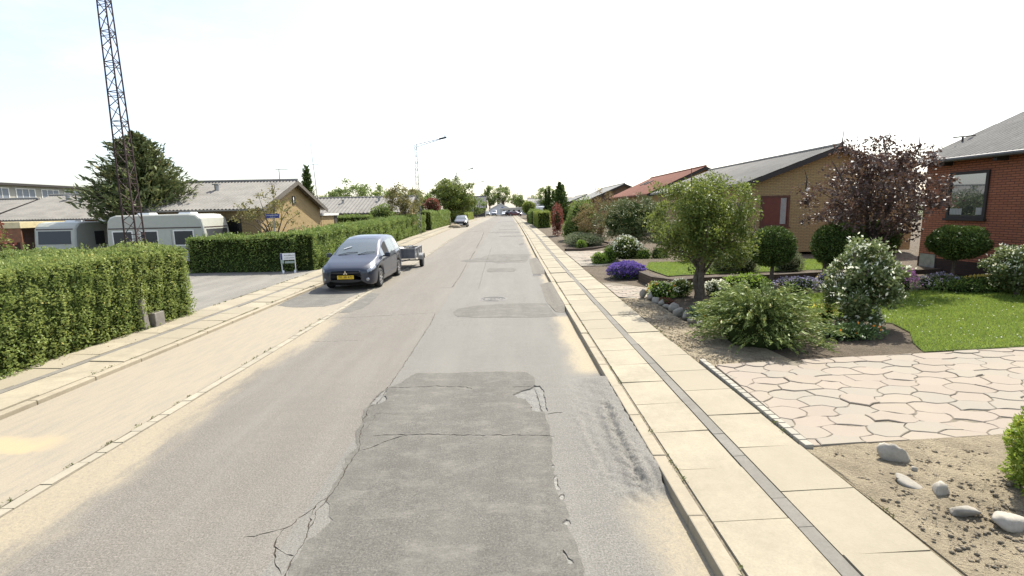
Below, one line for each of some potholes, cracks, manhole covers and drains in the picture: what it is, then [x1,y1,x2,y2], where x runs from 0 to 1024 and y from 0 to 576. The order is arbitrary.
pothole [512,385,548,412]
crack [247,313,548,576]
